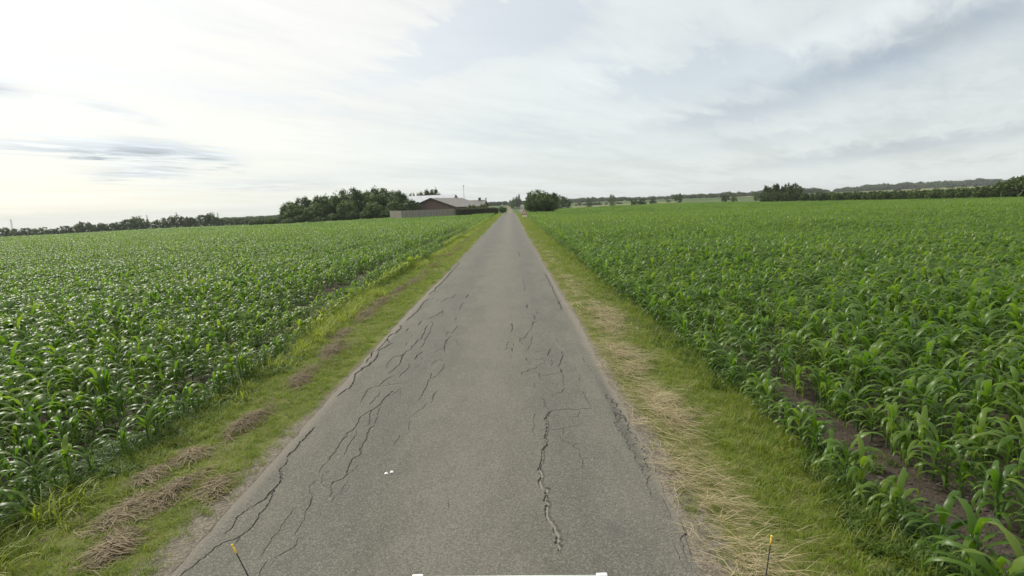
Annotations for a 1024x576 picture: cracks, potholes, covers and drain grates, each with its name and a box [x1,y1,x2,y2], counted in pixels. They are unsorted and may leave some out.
crack [506,273,699,576]
crack [180,266,469,576]
